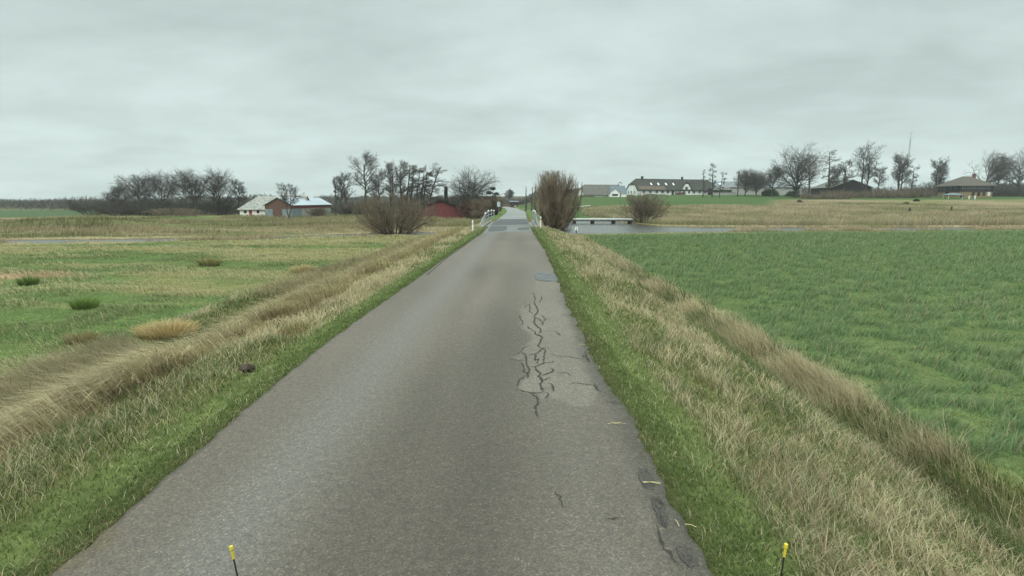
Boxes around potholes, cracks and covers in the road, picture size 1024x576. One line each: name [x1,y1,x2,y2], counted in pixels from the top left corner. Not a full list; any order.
crack [511,293,621,417]
pothole [650,496,668,528]
pothole [676,545,699,568]
pothole [638,468,655,490]
